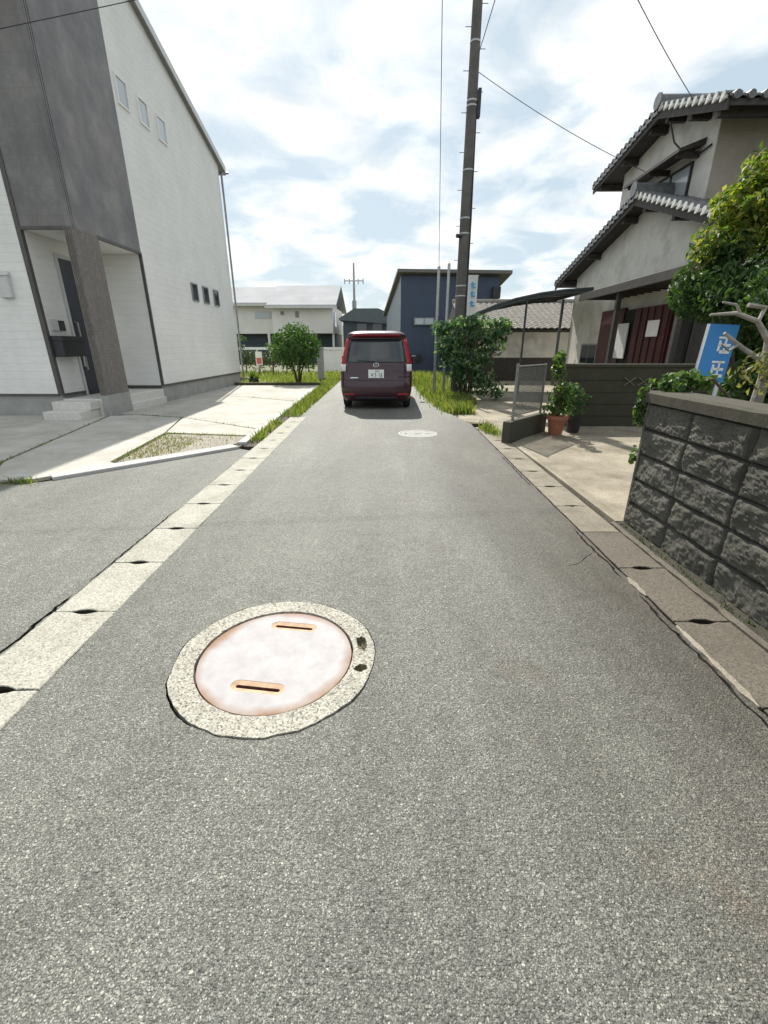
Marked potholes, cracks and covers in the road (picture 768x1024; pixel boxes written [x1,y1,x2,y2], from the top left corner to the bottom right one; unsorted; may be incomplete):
crack [570,529,619,576]
manhole cover [167,602,375,740]
pothole [356,636,367,652]
